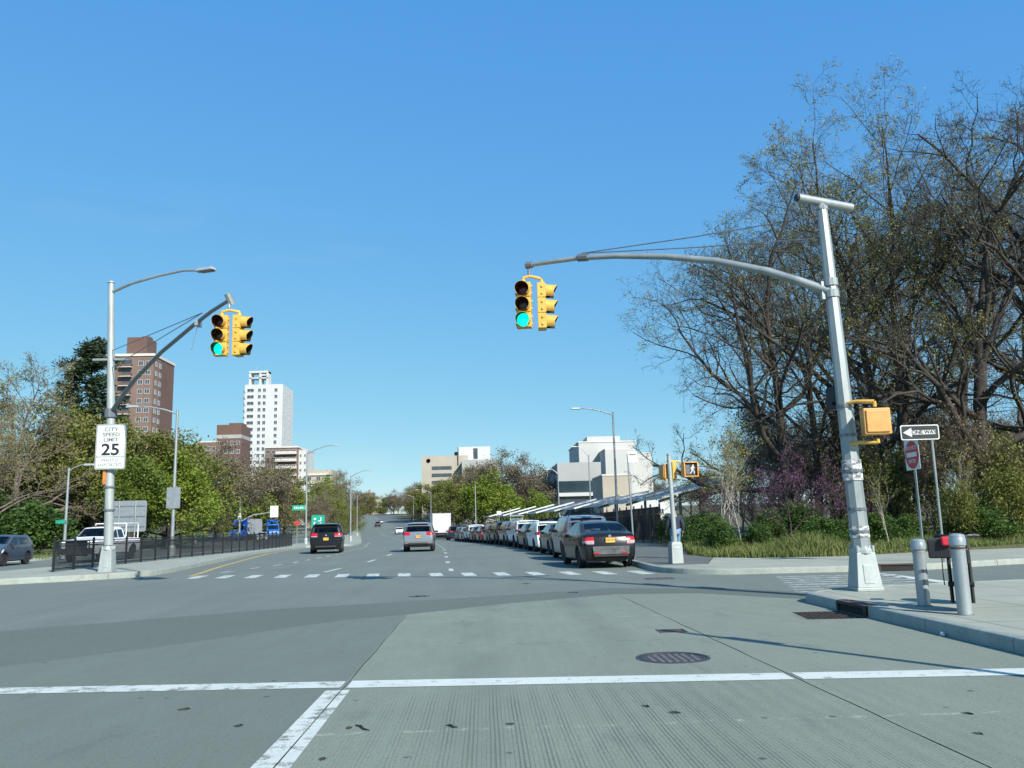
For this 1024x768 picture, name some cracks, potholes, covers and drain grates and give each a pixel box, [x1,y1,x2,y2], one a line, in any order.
manhole cover [635,652,711,664]
drain grate [792,600,880,619]
drain grate [878,563,914,571]
